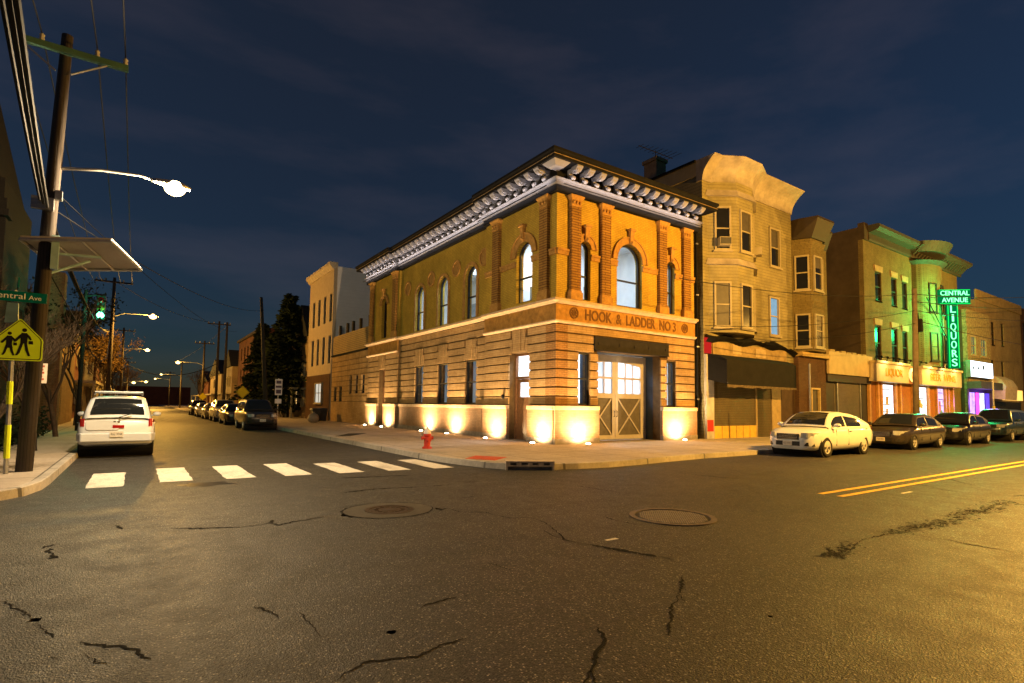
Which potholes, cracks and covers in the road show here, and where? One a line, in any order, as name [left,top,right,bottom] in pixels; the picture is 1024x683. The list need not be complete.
crack [583,626,607,683]
crack [846,532,1014,553]
crack [663,557,685,636]
crack [0,601,65,637]
manhole cover [629,508,717,526]
drain grate [505,460,555,471]
manhole cover [365,505,414,514]
crack [82,640,151,664]
